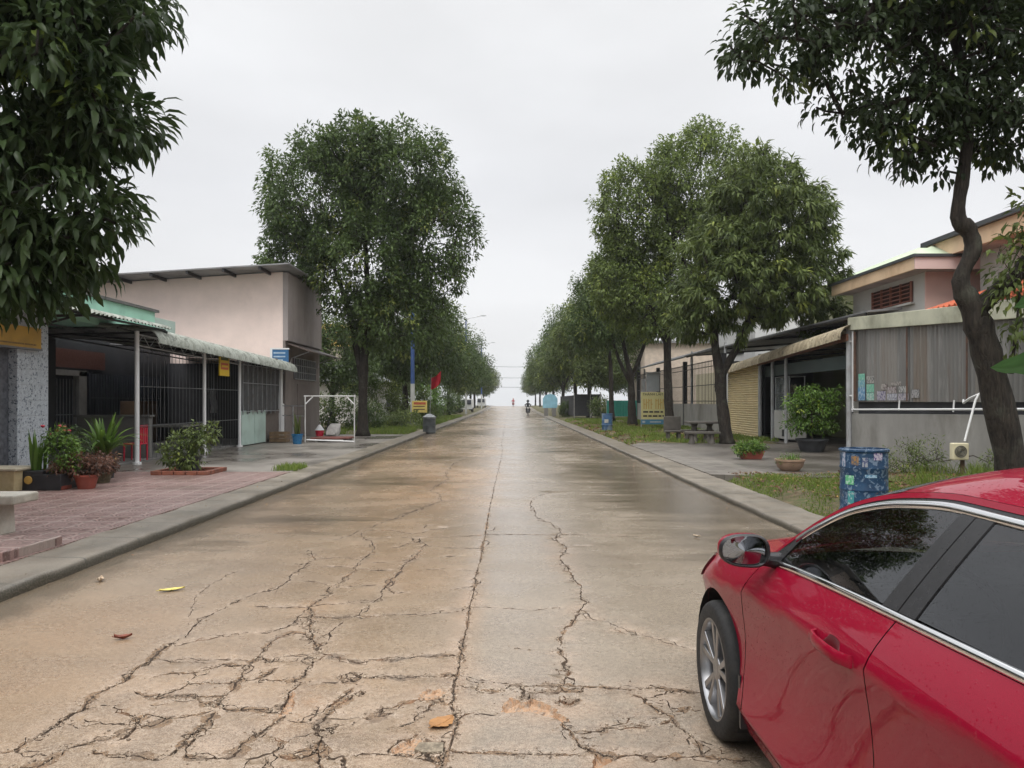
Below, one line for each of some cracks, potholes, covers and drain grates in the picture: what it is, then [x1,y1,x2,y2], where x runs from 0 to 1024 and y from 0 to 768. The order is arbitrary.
pothole [391,738,422,756]
pothole [501,697,569,722]
crack [0,420,751,768]
